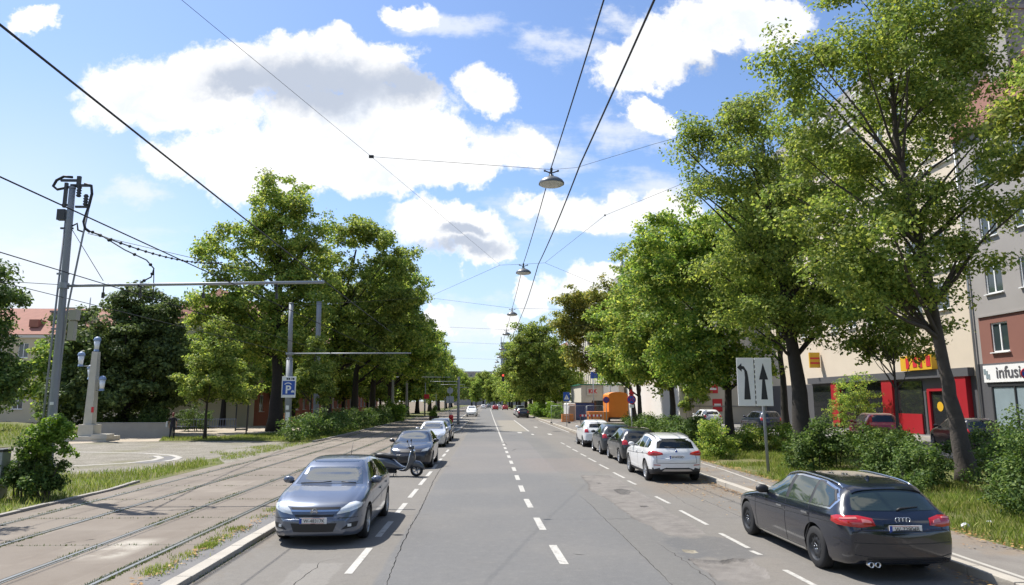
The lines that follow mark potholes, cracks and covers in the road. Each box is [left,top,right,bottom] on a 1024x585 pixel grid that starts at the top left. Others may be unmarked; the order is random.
crack [580,496,716,585]
crack [387,469,441,584]
